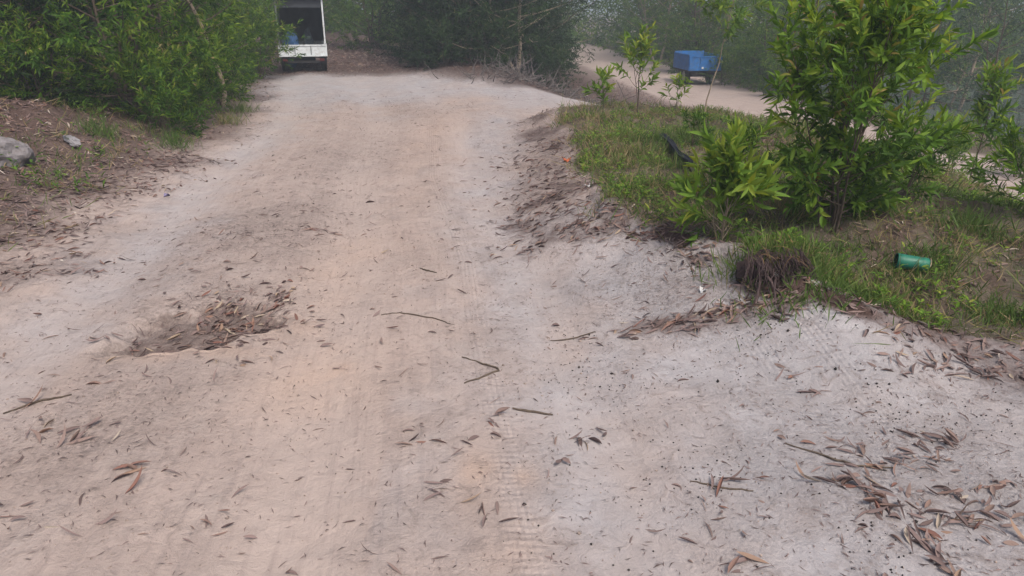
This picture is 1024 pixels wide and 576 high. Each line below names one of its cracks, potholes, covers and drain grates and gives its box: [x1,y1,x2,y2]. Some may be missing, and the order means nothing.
pothole [78,294,317,360]
